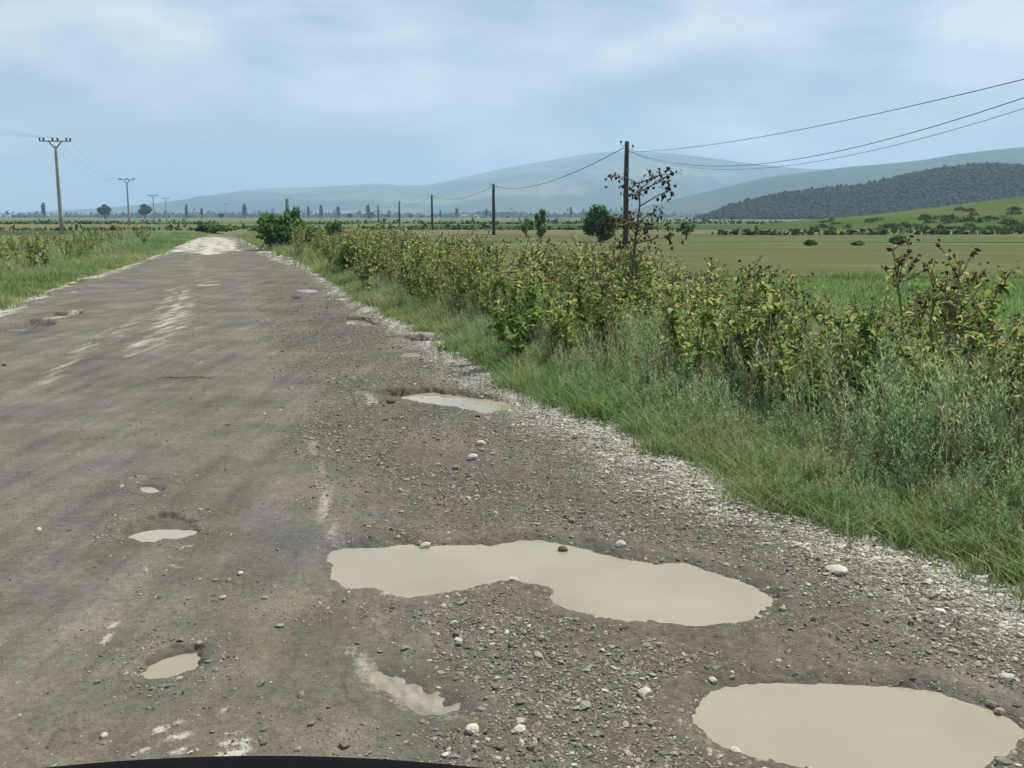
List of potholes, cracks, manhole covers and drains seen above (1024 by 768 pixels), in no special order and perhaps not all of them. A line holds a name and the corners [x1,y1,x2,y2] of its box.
pothole [652,656,1024,768]
pothole [369,387,530,415]
pothole [339,655,499,733]
pothole [333,316,385,327]
pothole [117,639,226,686]
pothole [124,476,179,496]
pothole [104,510,211,548]
pothole [294,526,804,637]
